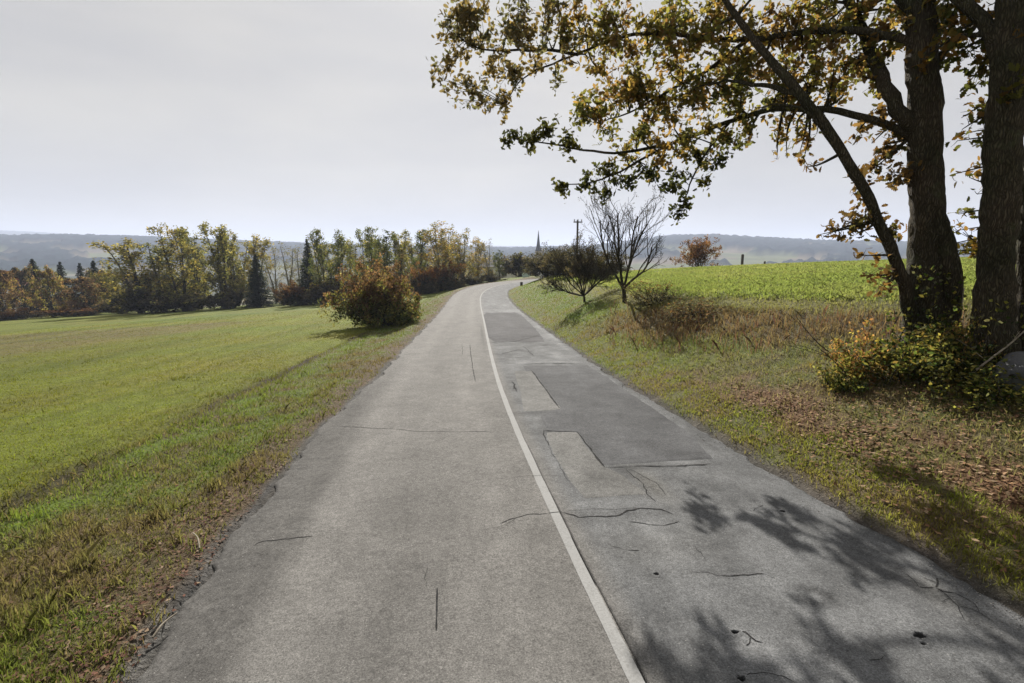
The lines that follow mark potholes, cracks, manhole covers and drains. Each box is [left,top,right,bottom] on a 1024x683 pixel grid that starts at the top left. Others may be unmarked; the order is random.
pothole [908,629,934,641]
crack [907,574,991,620]
crack [483,463,710,530]
